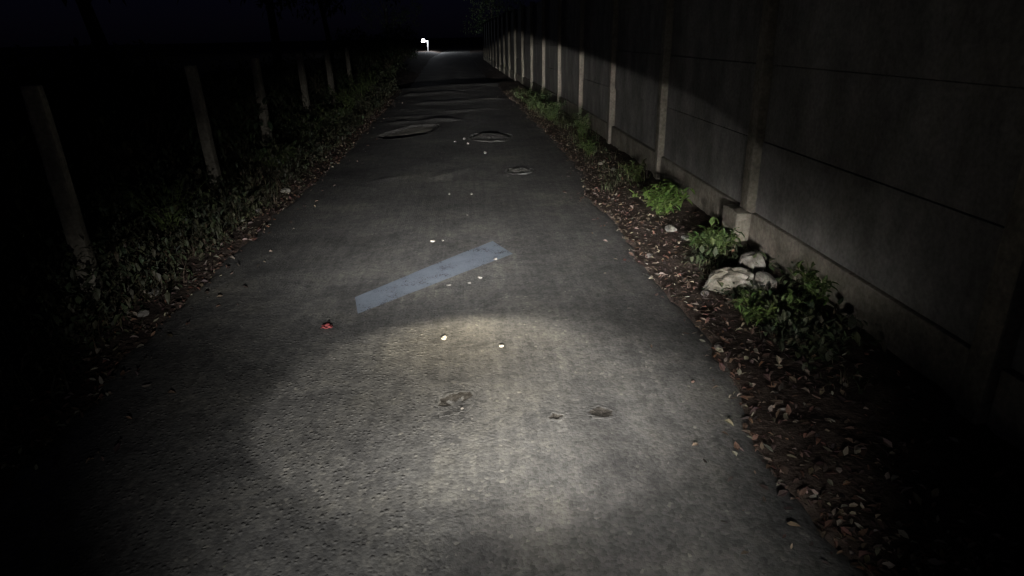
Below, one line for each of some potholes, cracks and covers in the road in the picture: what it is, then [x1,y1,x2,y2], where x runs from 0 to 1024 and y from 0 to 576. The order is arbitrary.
pothole [376,124,439,140]
pothole [545,411,568,421]
pothole [434,389,478,417]
pothole [583,404,617,420]
pothole [504,167,536,175]
pothole [467,132,514,142]
